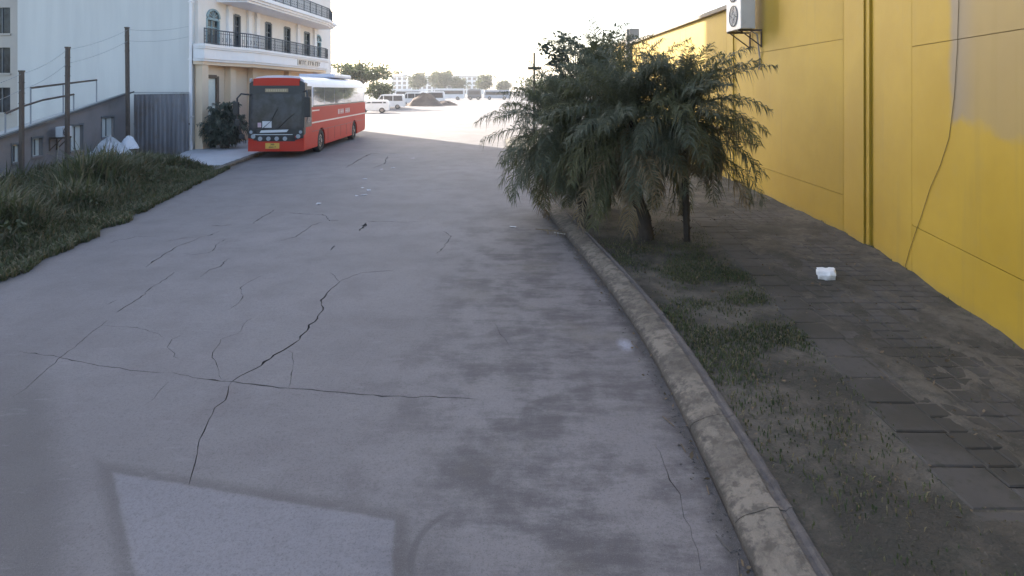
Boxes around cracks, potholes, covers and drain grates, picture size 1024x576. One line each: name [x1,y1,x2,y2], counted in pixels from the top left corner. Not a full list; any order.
crack [655,446,701,569]
crack [16,225,470,483]
